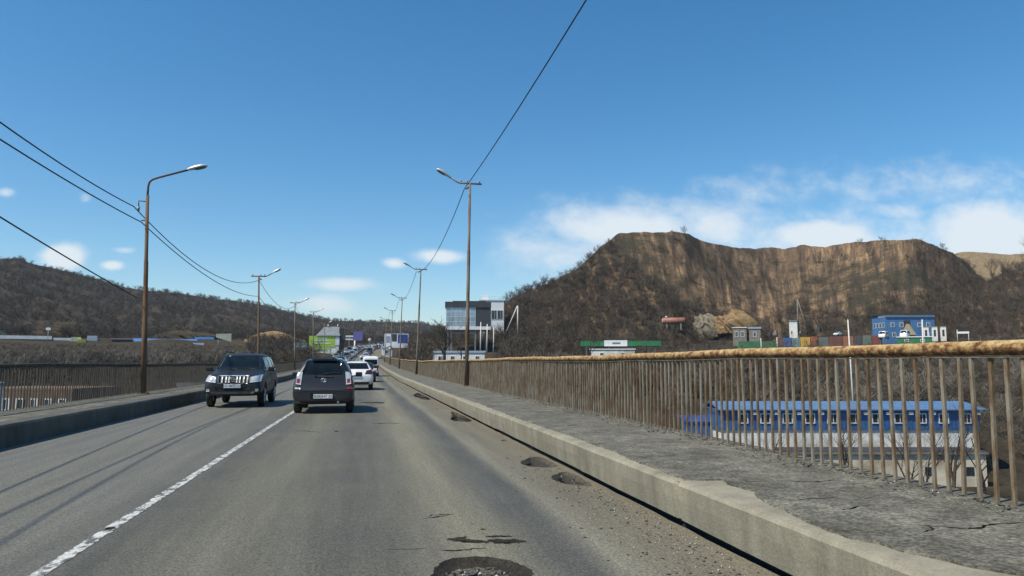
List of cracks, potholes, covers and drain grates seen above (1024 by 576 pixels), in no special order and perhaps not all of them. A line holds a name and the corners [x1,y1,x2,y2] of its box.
pothole [430,556,534,576]
pothole [446,536,489,544]
pothole [520,457,559,468]
crack [909,522,1021,532]
pothole [450,412,472,422]
pothole [550,472,592,486]
